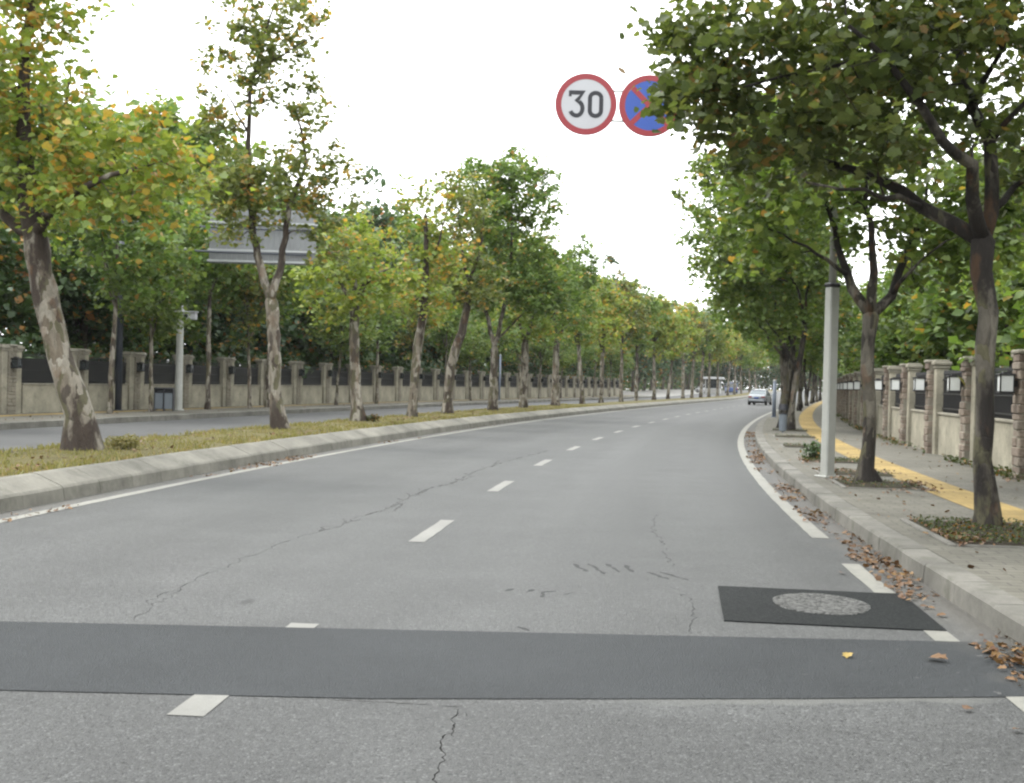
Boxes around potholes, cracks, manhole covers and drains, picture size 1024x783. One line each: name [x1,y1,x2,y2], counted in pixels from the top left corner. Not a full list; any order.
manhole cover [772,593,871,615]
crack [324,699,467,783]
crack [573,515,698,634]
crack [505,589,571,598]
crack [134,451,545,619]
